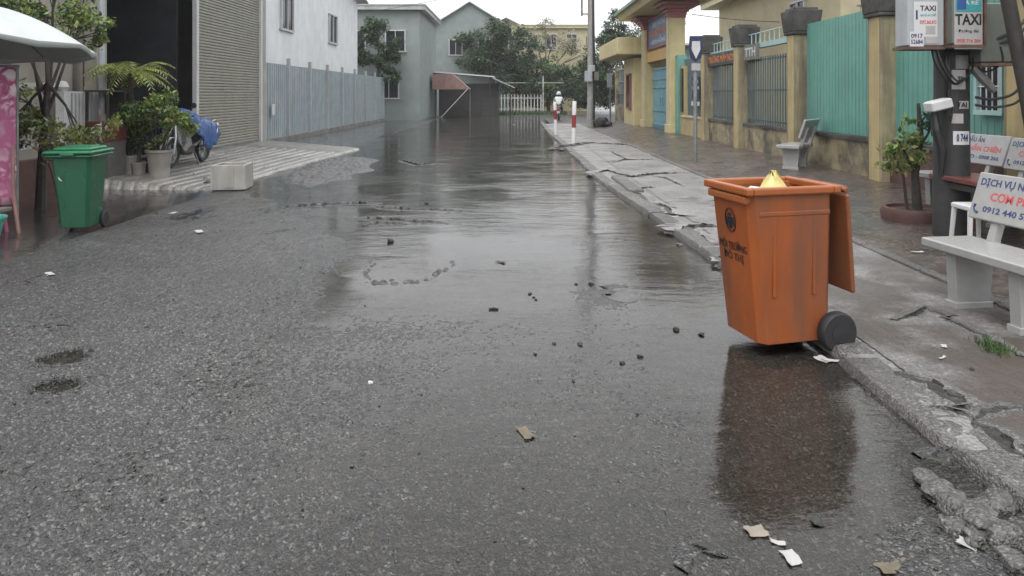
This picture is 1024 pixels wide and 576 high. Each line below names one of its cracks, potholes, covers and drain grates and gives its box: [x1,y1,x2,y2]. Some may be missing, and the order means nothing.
pothole [21,345,97,368]
crack [893,371,1024,469]
pothole [25,376,87,396]
crack [267,201,462,227]
crack [548,142,720,261]
crack [890,305,1024,356]
